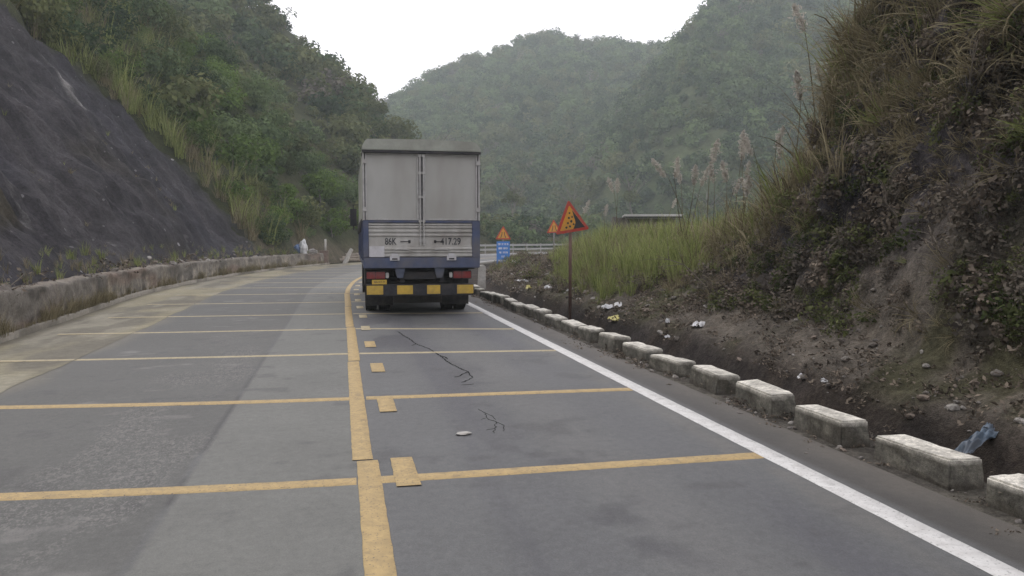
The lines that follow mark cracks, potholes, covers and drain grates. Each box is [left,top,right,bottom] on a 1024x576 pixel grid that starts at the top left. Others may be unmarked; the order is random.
crack [399,332,473,385]
